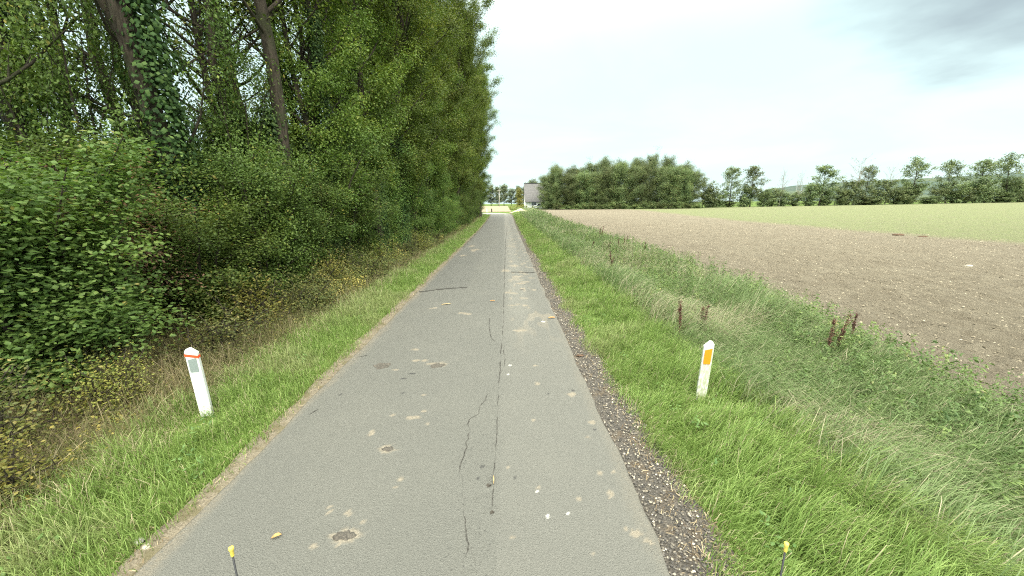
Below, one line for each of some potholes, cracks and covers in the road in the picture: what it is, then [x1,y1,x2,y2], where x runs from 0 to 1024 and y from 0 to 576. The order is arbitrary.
pothole [326,525,363,546]
crack [459,382,498,564]
pothole [370,362,394,371]
pothole [377,444,398,455]
pothole [427,362,449,370]
